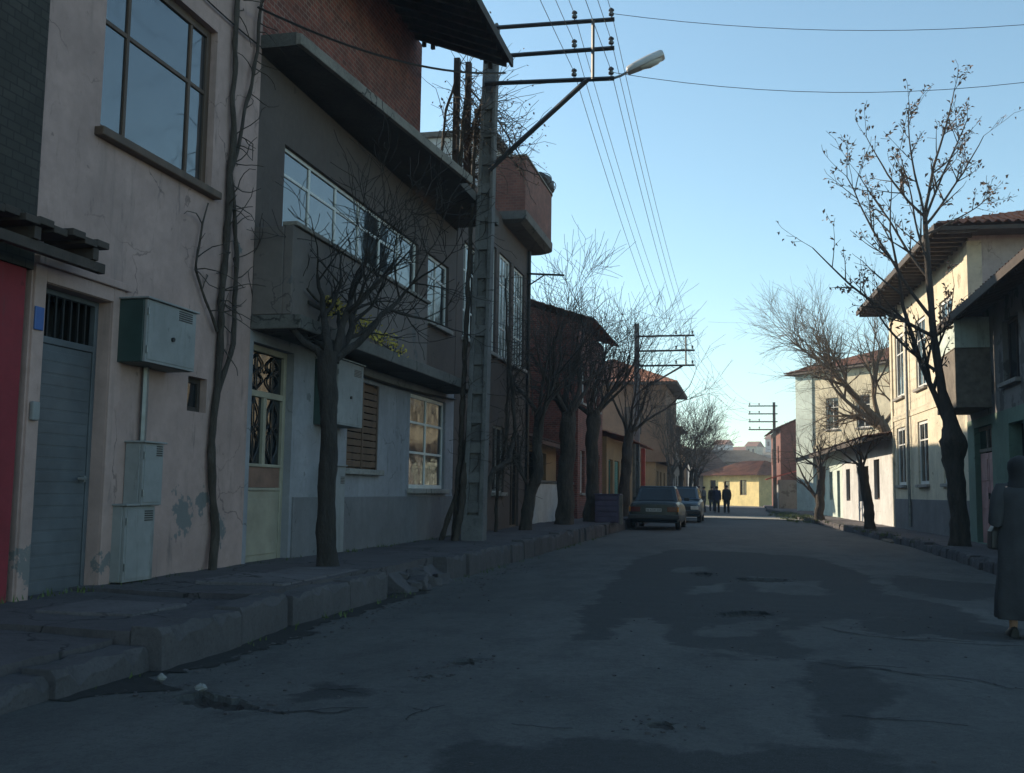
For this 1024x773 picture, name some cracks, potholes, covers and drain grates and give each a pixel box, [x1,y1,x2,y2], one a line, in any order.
pothole [161,691,266,713]
crack [249,688,367,715]
crack [824,627,1019,646]
pothole [635,719,687,733]
pothole [712,610,780,618]
crack [819,662,1017,689]
